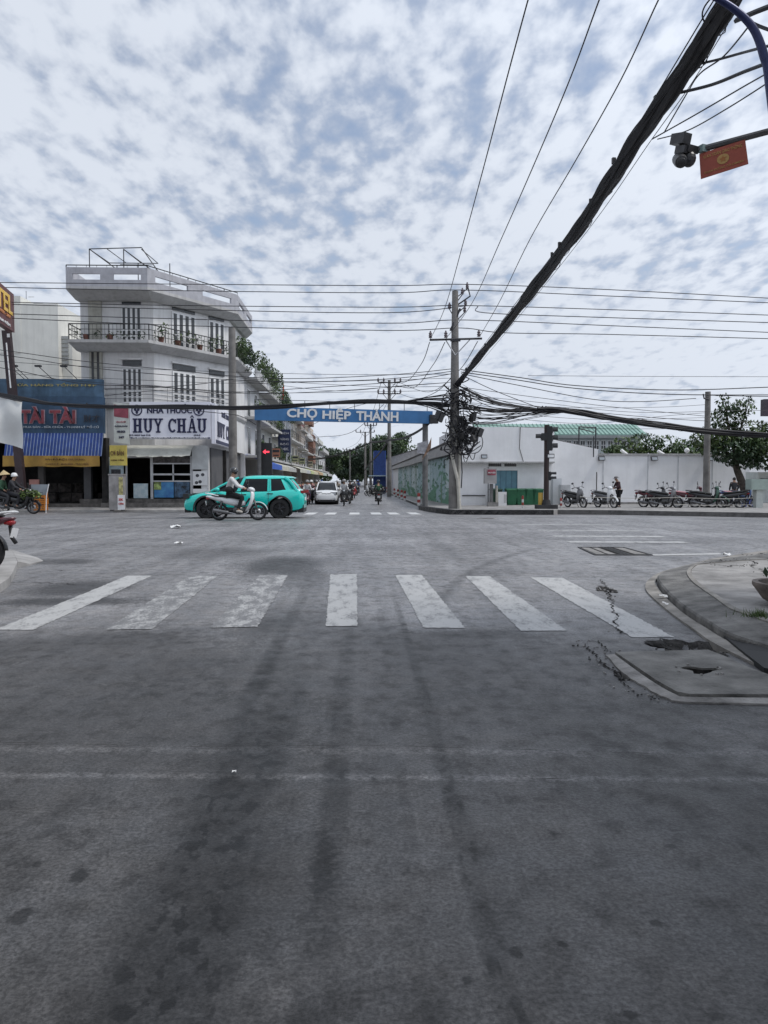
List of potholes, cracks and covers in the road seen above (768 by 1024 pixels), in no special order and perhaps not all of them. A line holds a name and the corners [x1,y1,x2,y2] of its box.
crack [572,579,669,703]
pothole [644,638,729,657]
pothole [675,664,724,676]
